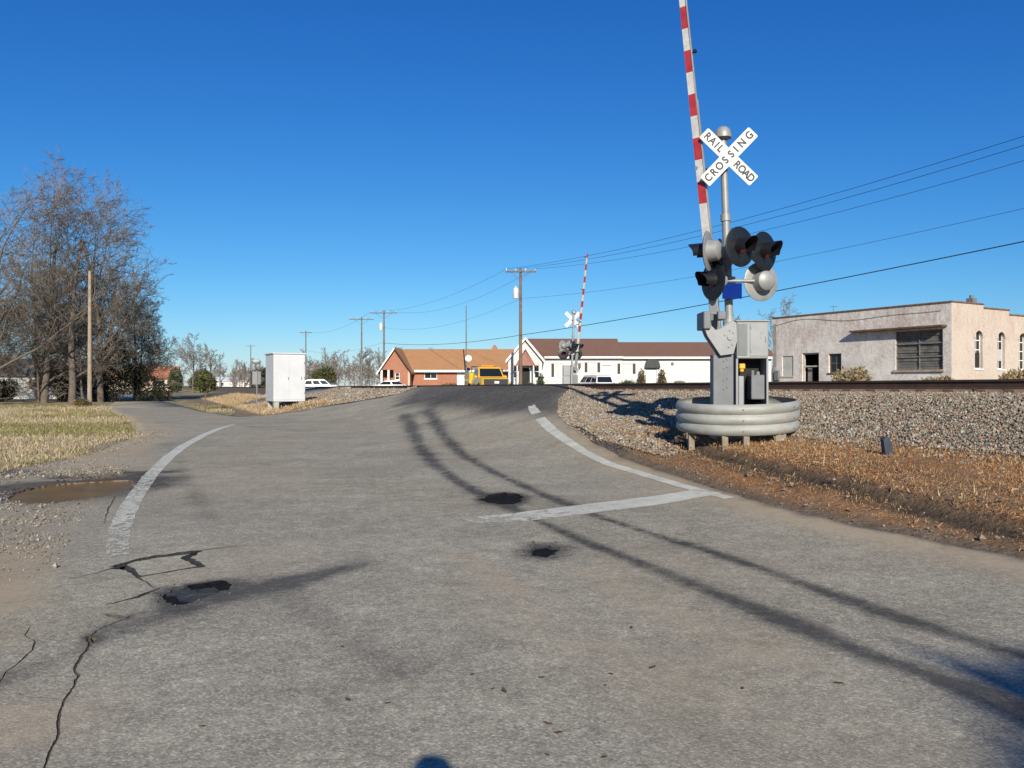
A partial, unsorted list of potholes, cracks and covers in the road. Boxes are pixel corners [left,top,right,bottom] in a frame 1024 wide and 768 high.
pothole [7,478,163,504]
pothole [154,579,240,606]
pothole [517,541,572,562]
pothole [477,492,528,504]
crack [0,545,273,768]
